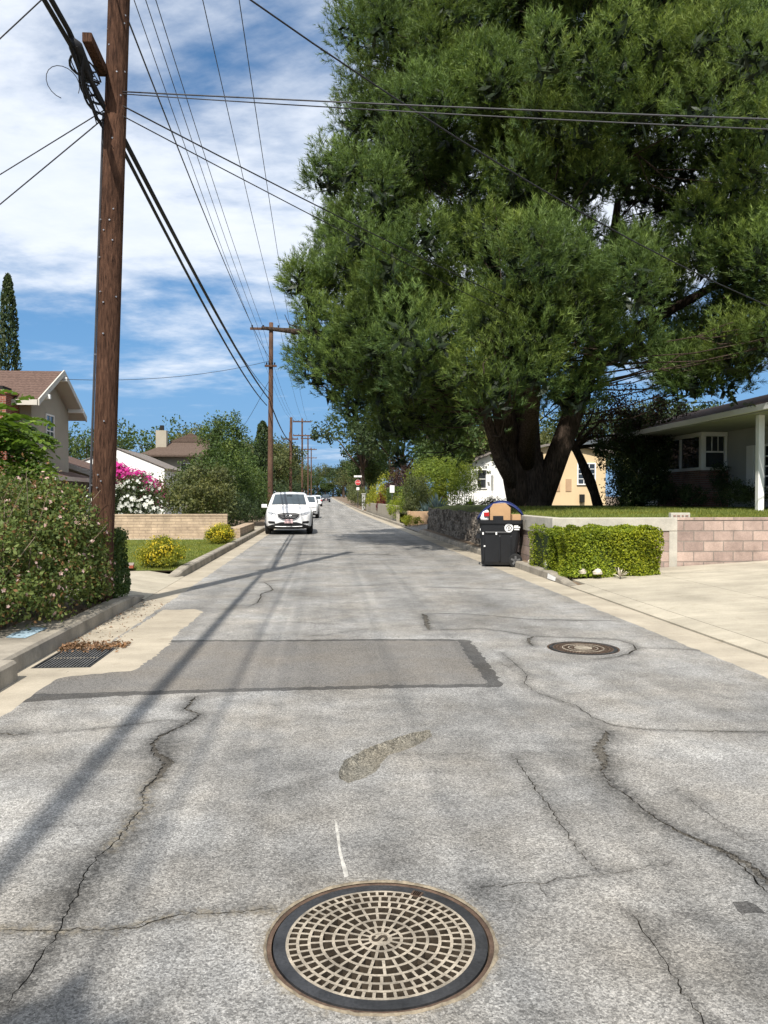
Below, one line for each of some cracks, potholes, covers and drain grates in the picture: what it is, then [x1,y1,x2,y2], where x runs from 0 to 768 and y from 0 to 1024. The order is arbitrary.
crack [632,914,704,1024]
drain grate [32,648,116,668]
crack [418,752,669,902]
crack [603,639,689,659]
manhole cover [263,880,499,1017]
crack [5,697,272,1002]
crack [501,653,768,893]
manhole cover [547,642,620,655]
